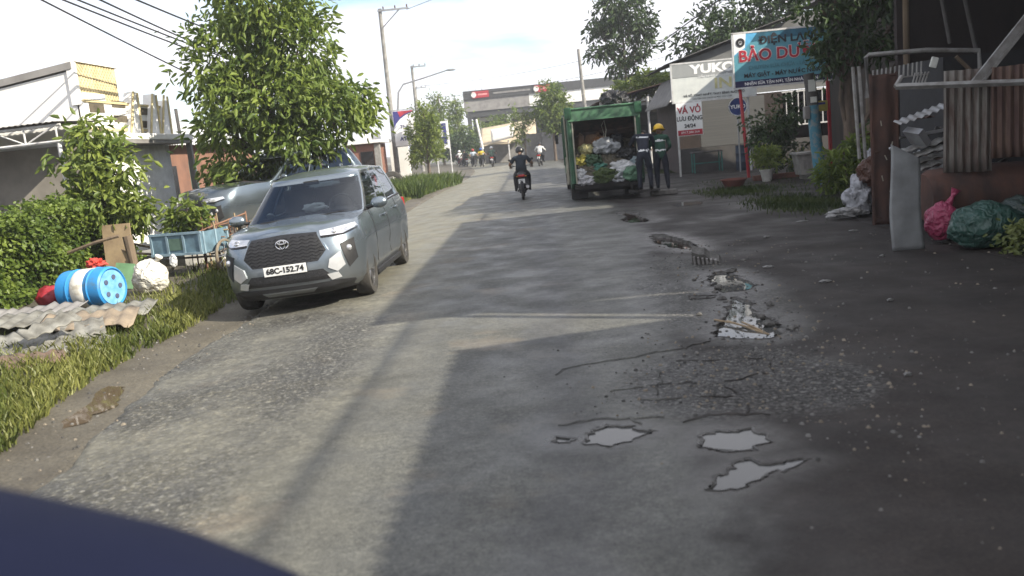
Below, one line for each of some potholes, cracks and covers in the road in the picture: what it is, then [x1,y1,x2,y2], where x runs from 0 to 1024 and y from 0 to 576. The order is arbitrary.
pothole [705,270,758,292]
pothole [696,427,773,451]
crack [555,341,774,425]
pothole [711,296,785,339]
pothole [581,423,659,446]
pothole [705,457,813,490]
pothole [648,233,699,250]
pothole [617,210,649,223]
